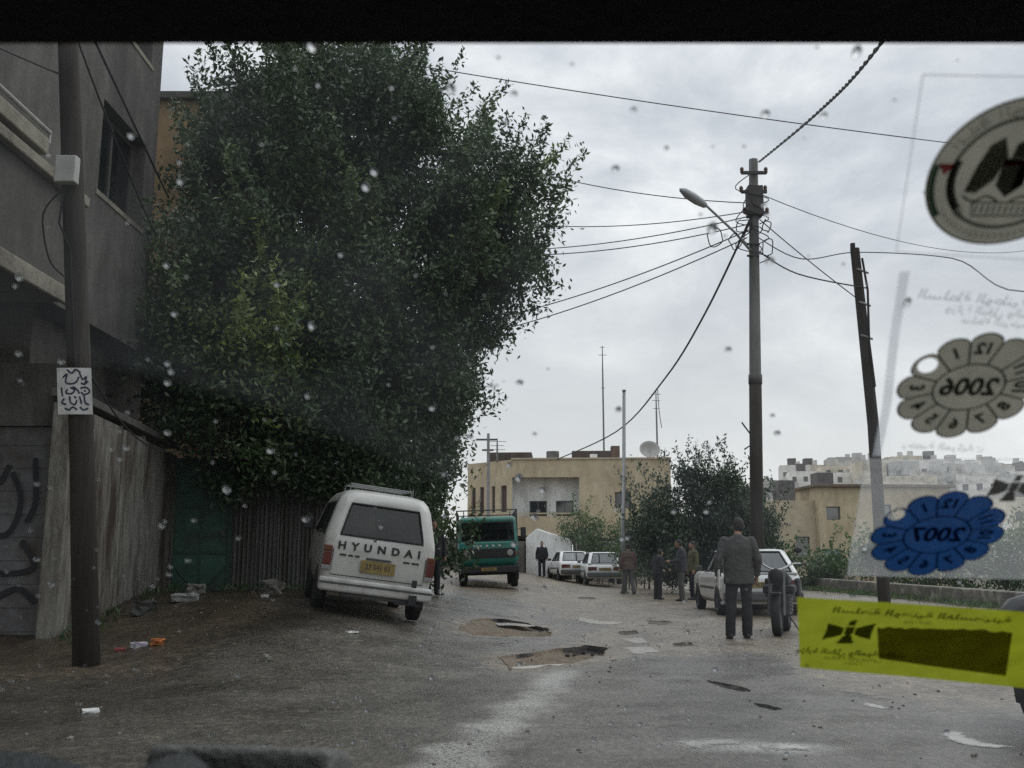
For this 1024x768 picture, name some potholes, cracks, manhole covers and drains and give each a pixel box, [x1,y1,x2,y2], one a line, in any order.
pothole [458,618,552,637]
pothole [707,680,751,692]
pothole [497,645,608,669]
